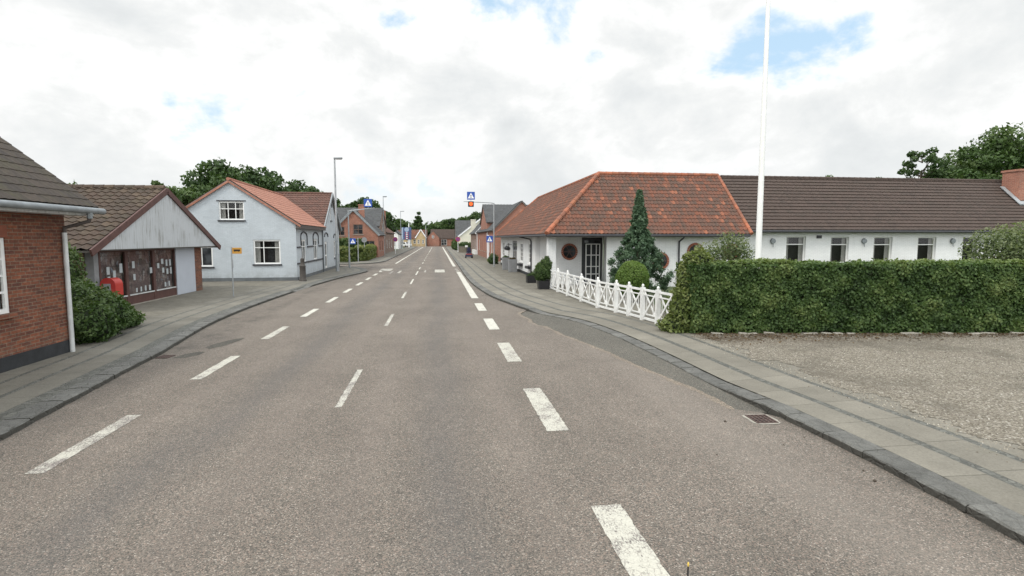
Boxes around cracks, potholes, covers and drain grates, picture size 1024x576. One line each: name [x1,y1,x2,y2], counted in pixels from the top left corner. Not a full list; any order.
drain grate [742,414,781,425]
